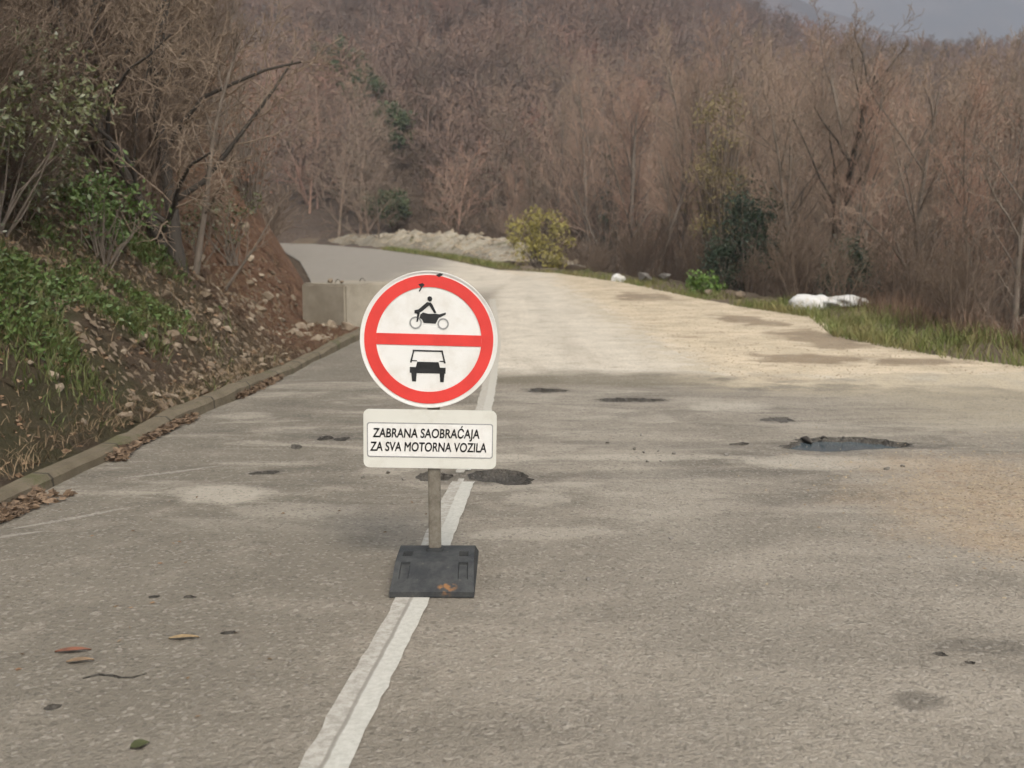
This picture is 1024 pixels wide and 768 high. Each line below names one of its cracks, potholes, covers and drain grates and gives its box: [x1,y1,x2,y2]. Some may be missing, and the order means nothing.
pothole [778,437,913,452]
pothole [415,471,453,481]
pothole [467,469,534,485]
